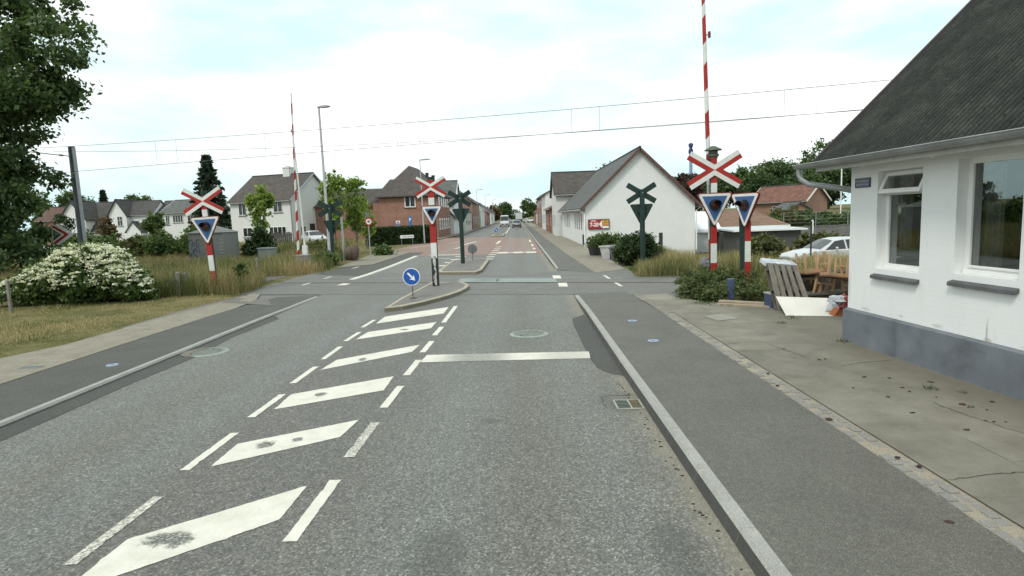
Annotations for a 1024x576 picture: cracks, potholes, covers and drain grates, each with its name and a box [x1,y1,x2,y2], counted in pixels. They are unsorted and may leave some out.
manhole cover [510,330,549,338]
drain grate [613,399,645,410]
manhole cover [180,347,229,357]
